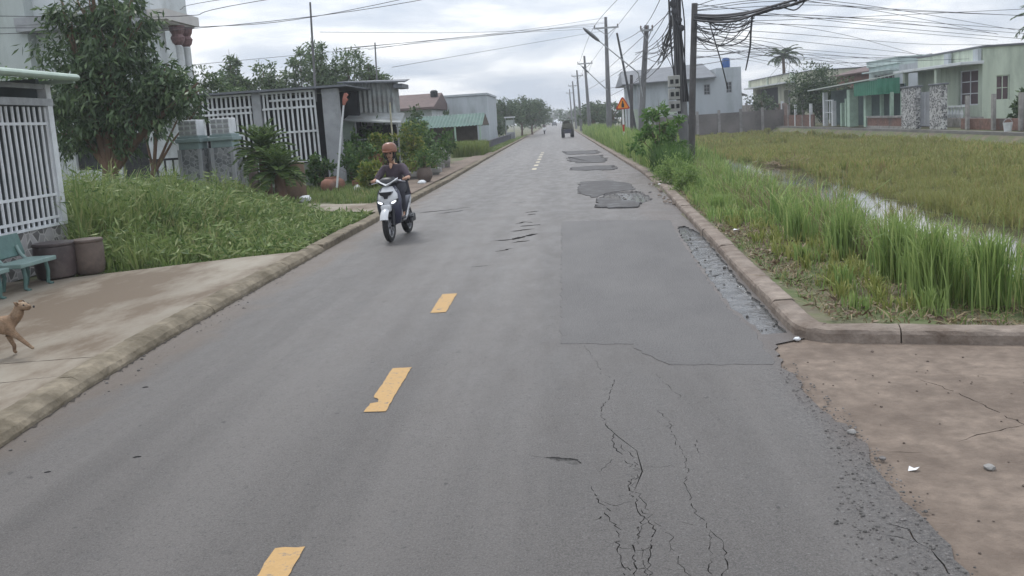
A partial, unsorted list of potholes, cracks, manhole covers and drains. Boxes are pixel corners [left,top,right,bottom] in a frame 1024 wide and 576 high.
crack [659,384,728,576]
crack [584,345,674,576]
pothole [677,226,787,334]
crack [882,523,950,574]
